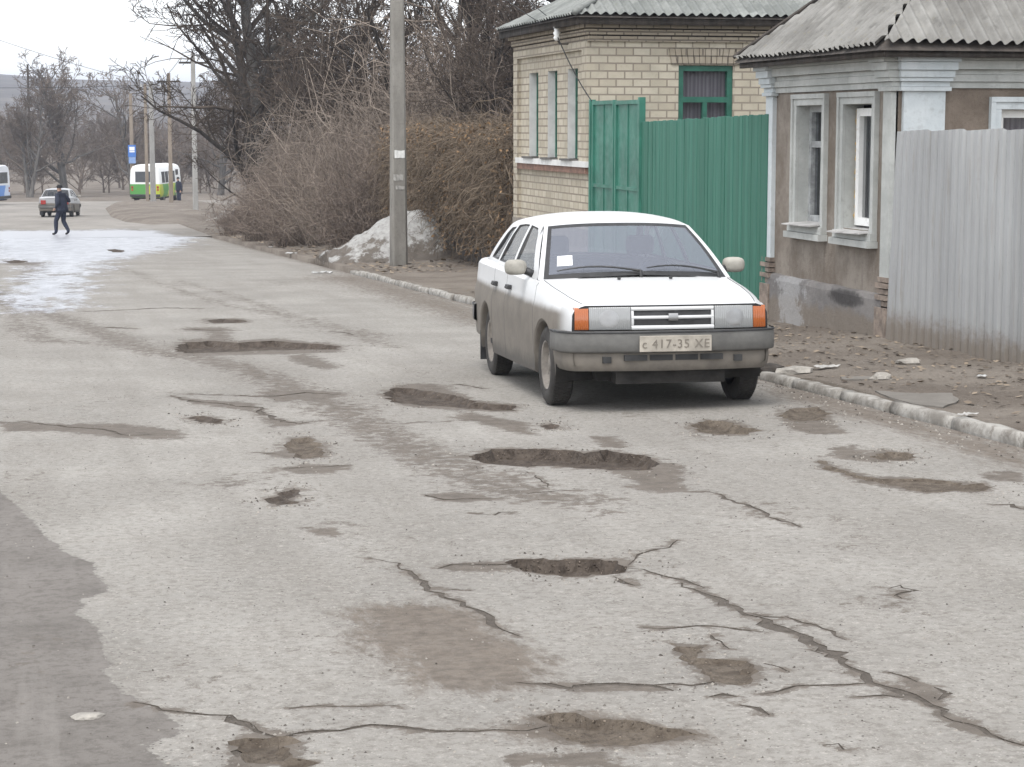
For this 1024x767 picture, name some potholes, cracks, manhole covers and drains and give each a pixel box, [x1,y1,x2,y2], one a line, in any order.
pothole [870,452,916,461]
crack [517,540,1024,750]
pothole [817,461,993,493]
pothole [469,449,659,471]
pothole [505,558,627,577]
pothole [383,387,516,411]
pothole [691,420,762,435]
pothole [227,736,319,767]
crack [703,491,800,527]
pothole [283,437,325,459]
pothole [670,643,759,685]
crack [370,558,519,636]
